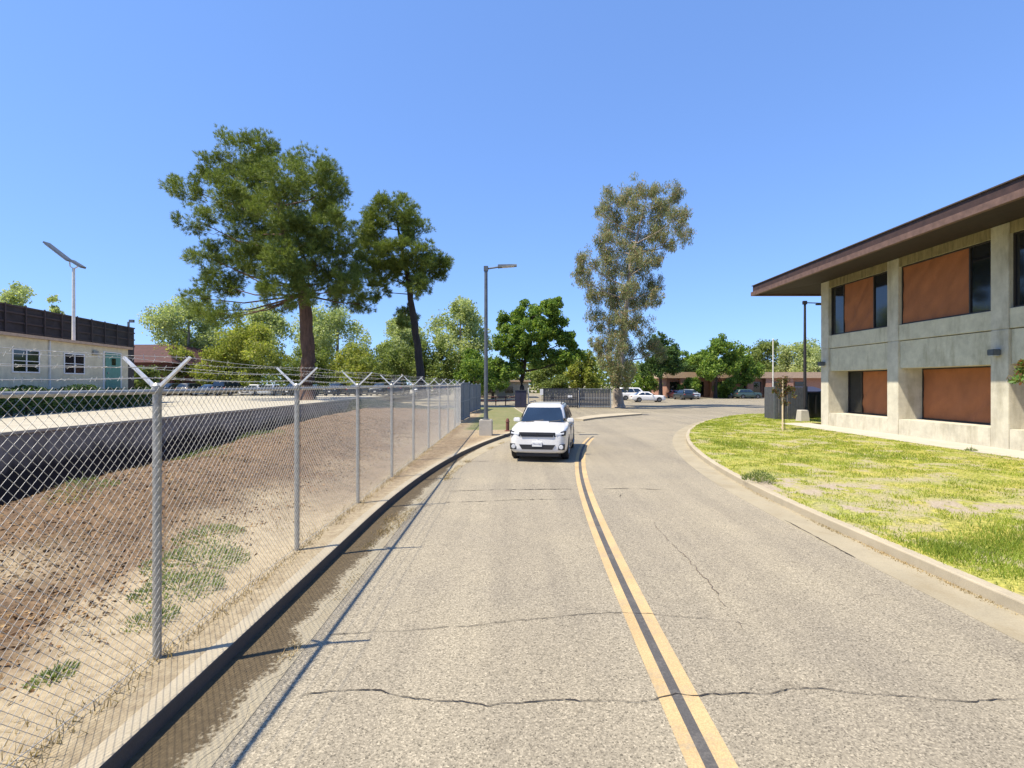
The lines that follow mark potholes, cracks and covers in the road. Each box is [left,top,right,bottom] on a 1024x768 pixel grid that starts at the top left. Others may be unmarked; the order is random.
crack [657,528,743,629]
crack [299,687,1018,710]
crack [330,612,747,635]
